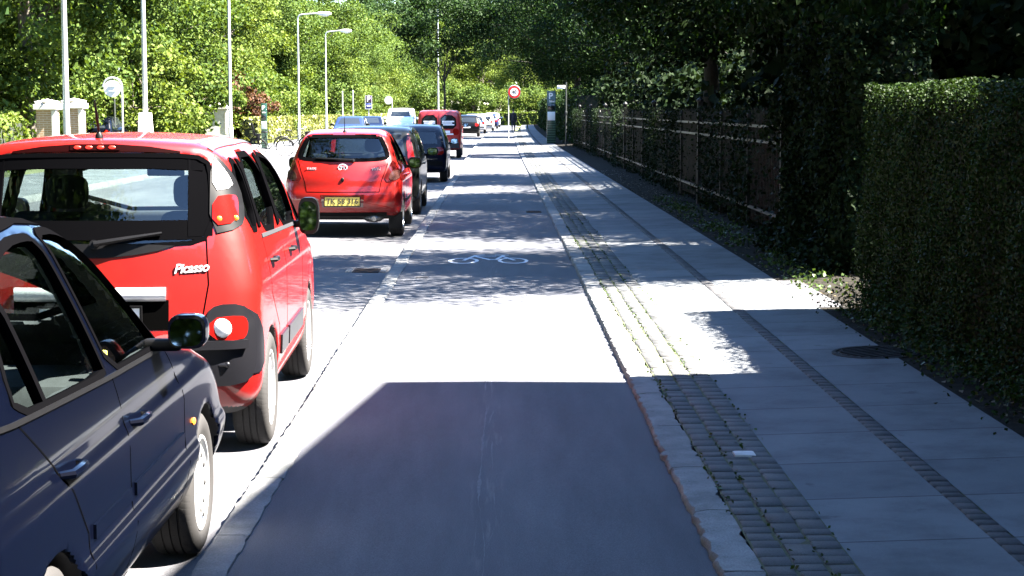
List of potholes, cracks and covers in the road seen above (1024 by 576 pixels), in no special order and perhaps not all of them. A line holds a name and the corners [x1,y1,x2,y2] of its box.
manhole cover [832,345,919,359]
